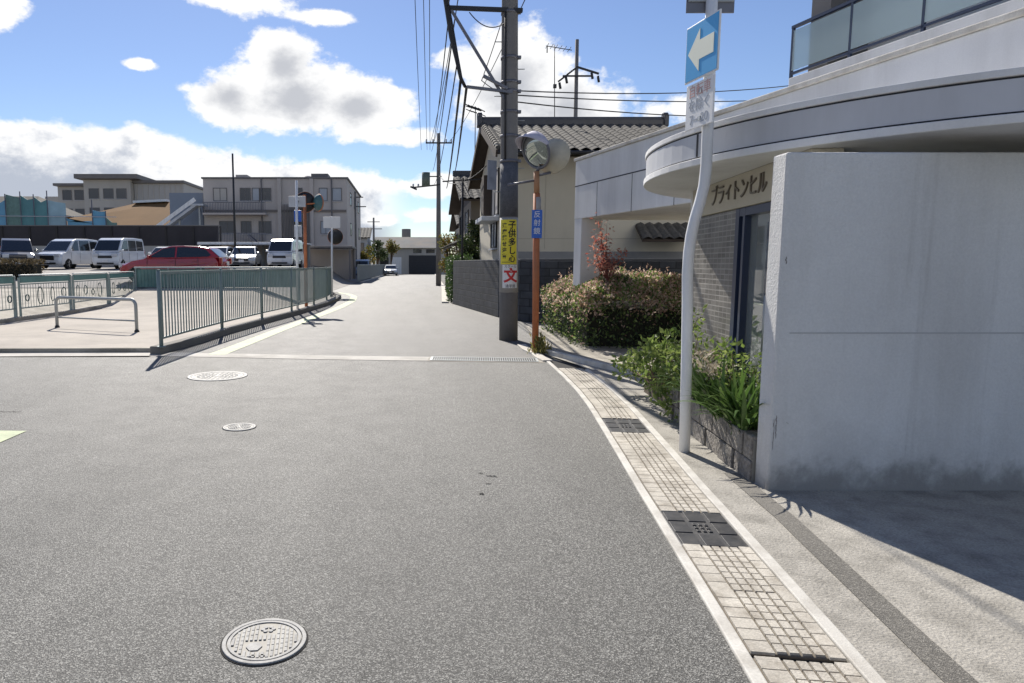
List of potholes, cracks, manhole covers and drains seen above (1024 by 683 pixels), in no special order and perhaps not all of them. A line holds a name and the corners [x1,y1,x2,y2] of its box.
drain grate [602,419,650,434]
manhole cover [187,371,248,381]
manhole cover [222,423,257,431]
drain grate [660,511,749,549]
manhole cover [220,618,308,667]
